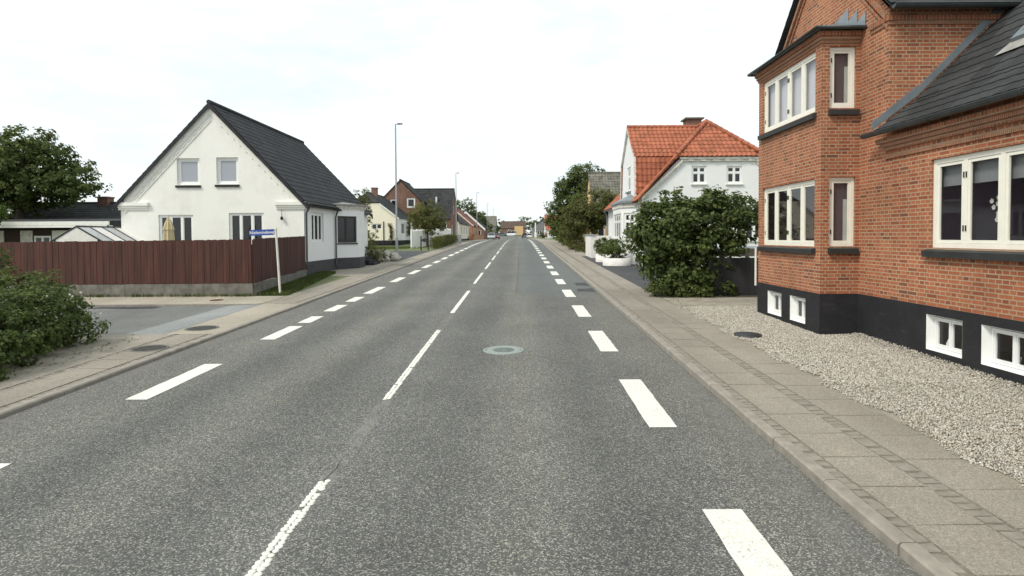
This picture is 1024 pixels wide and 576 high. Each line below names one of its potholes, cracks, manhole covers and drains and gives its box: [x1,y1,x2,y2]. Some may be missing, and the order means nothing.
manhole cover [483,346,524,355]
